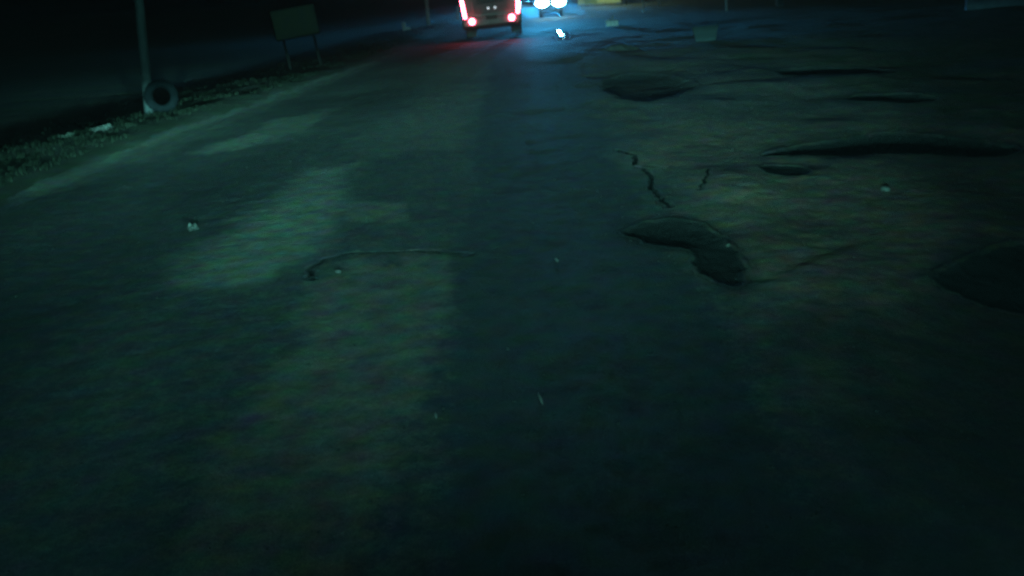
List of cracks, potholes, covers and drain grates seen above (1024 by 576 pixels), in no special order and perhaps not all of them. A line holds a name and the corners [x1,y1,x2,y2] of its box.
pothole [618,216,753,288]
crack [697,168,712,190]
crack [304,250,469,280]
pothole [758,130,1024,158]
